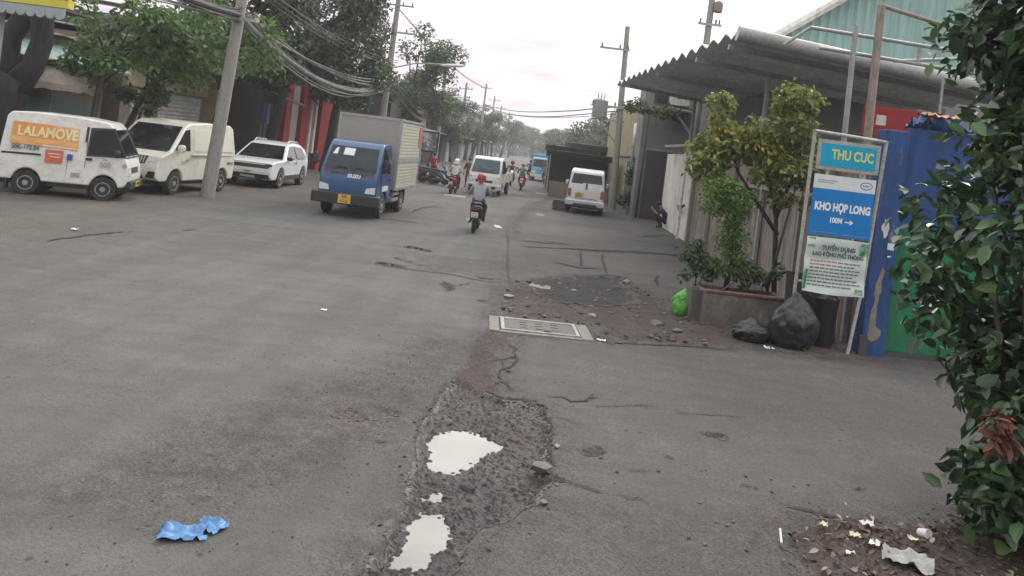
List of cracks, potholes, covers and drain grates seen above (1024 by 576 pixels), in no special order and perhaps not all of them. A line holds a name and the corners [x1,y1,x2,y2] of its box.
pothole [577,445,607,456]
crack [483,343,648,498]
pothole [359,379,555,576]
crack [47,231,131,241]
